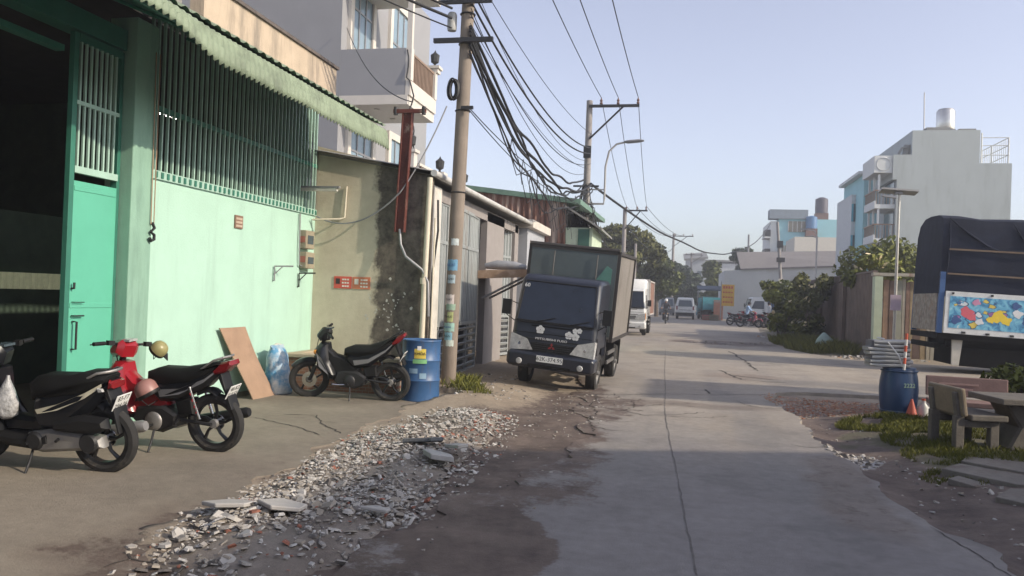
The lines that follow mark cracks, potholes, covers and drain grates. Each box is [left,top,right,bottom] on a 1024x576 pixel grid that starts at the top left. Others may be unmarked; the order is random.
crack [255,414,341,434]
crack [705,351,771,394]
crack [545,394,725,432]
